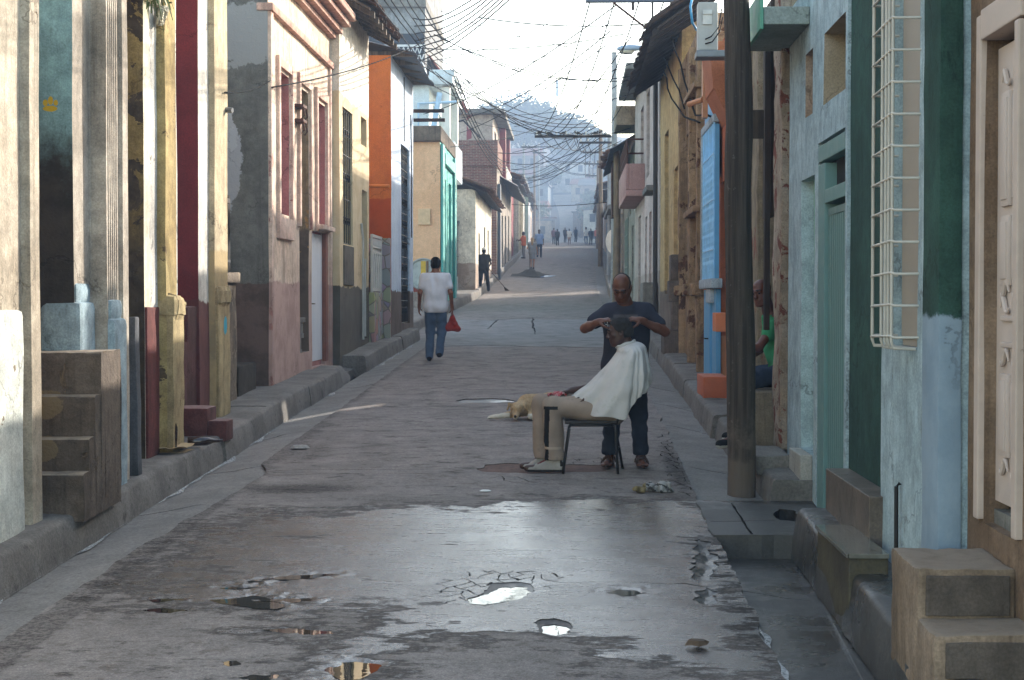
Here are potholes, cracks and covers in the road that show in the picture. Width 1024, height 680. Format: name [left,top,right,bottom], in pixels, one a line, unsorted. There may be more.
crack [435,571,563,602]
pothole [534,618,573,633]
pothole [467,582,534,605]
